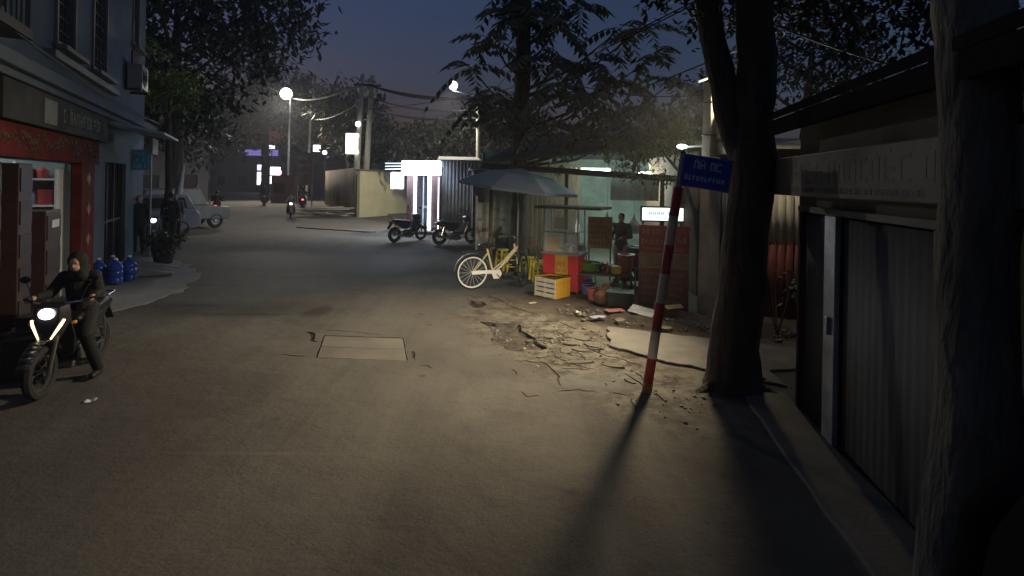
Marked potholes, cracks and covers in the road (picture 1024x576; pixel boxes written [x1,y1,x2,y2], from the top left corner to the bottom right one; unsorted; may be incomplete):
pothole [476,318,547,352]
crack [512,348,663,411]
manhole cover [315,335,408,361]
